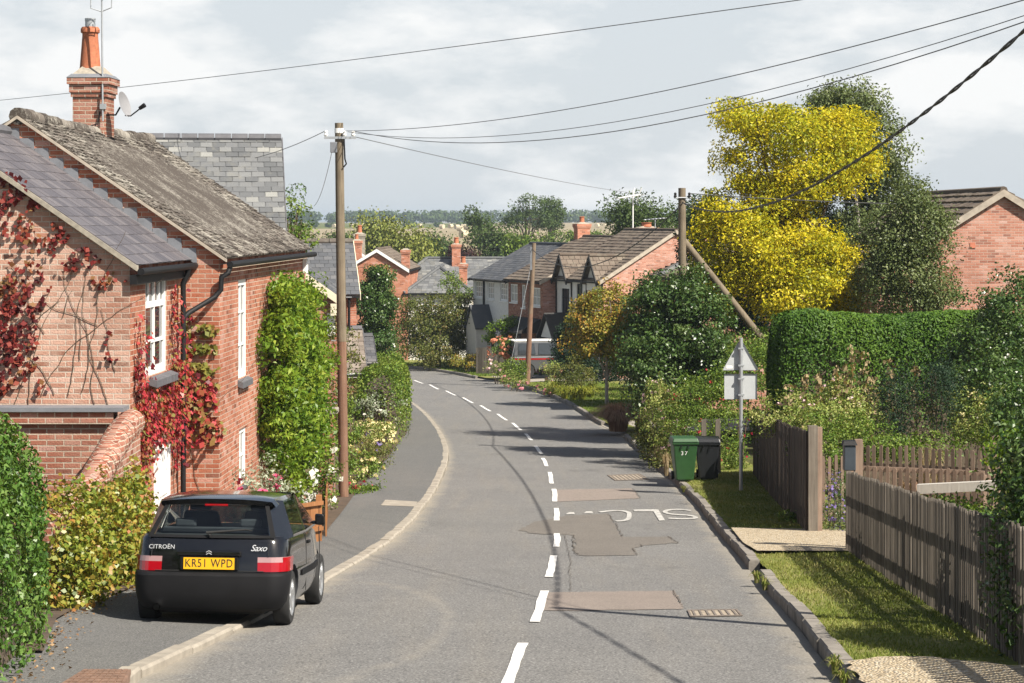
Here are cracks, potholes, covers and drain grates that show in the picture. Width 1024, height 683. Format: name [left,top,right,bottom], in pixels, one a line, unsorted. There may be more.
drain grate [607,473,650,481]
drain grate [687,609,743,617]
